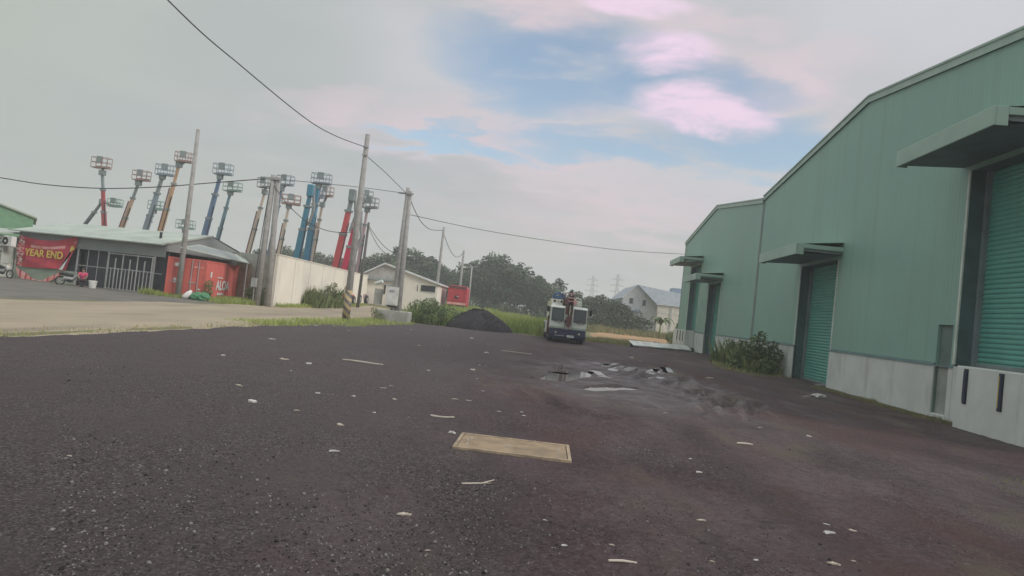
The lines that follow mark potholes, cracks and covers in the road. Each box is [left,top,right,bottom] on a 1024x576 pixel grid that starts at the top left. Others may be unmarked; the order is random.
manhole cover [452,432,572,463]
pothole [533,368,599,384]
pothole [566,383,648,394]
